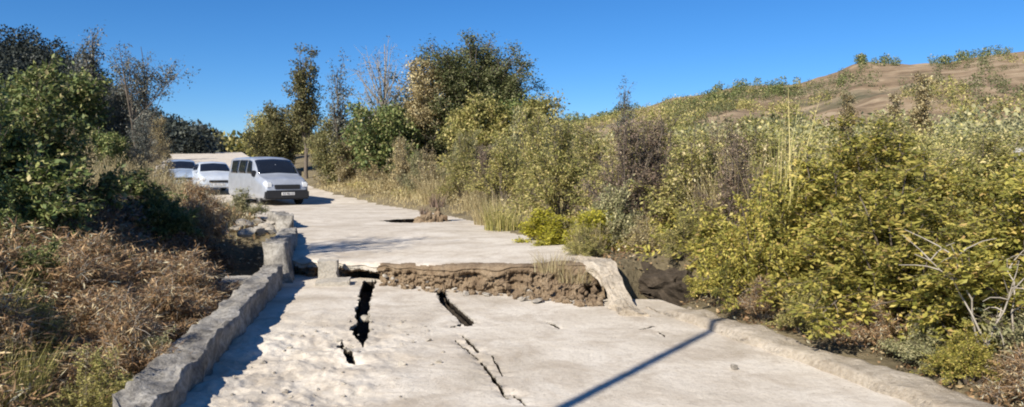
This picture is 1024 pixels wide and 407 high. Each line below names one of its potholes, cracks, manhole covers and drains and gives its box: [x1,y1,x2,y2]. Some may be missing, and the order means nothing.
crack [436,292,526,406]
crack [336,279,377,365]
